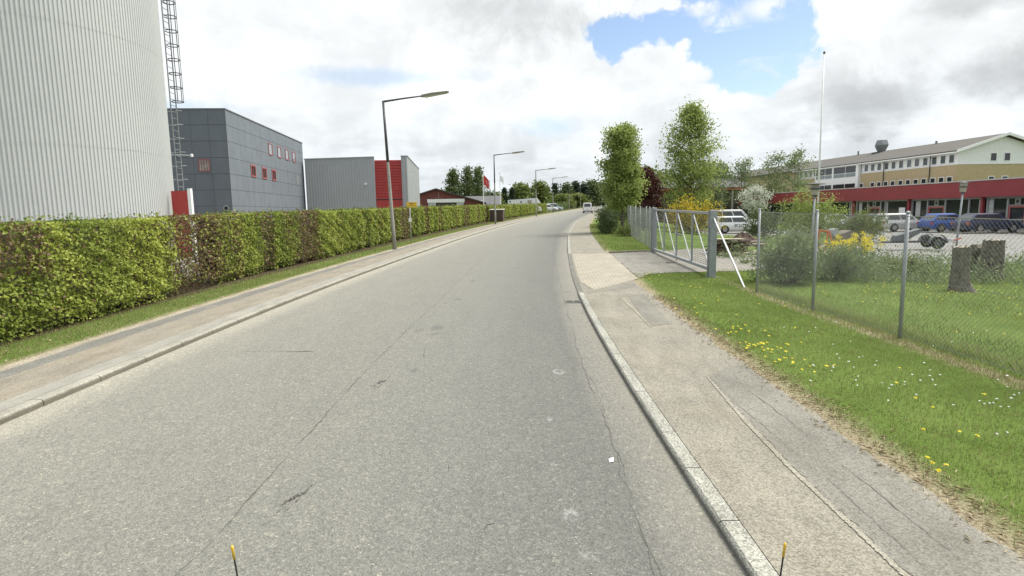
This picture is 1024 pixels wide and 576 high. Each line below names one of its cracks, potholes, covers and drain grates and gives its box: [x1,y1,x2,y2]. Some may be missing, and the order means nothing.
crack [174,247,500,576]
crack [553,224,662,576]
